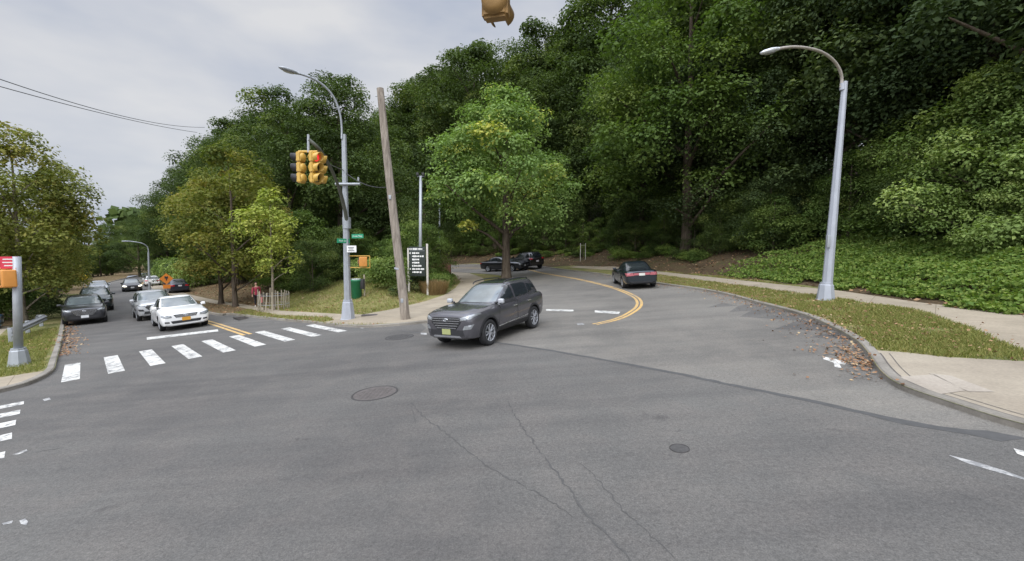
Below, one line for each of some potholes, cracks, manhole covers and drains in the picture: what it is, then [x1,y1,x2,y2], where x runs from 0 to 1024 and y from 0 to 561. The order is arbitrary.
manhole cover [351,386,398,401]
manhole cover [669,444,690,453]
crack [411,402,674,561]
